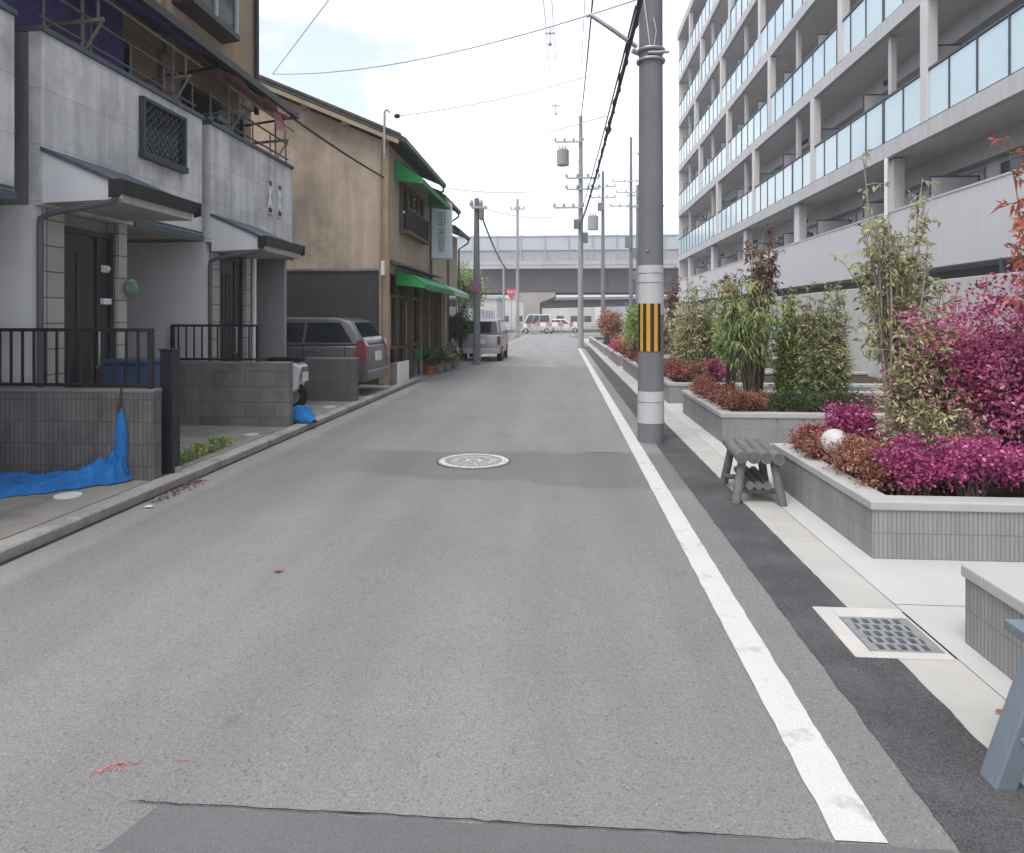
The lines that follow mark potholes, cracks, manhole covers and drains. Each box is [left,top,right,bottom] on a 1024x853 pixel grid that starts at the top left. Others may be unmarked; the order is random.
drain grate [813,606,957,661]
manhole cover [437,454,511,469]
